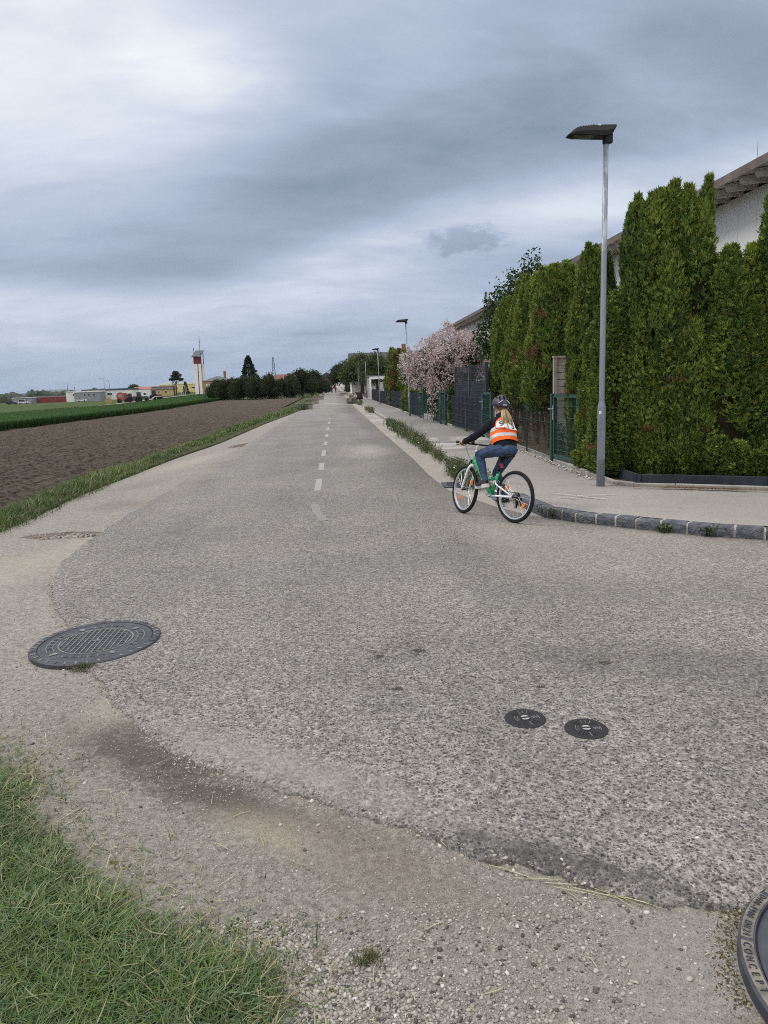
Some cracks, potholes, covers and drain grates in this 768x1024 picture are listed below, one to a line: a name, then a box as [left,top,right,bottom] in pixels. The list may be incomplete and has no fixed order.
manhole cover [28,620,161,670]
manhole cover [737,886,768,1024]
utility cover [504,709,546,729]
utility cover [564,719,608,739]
